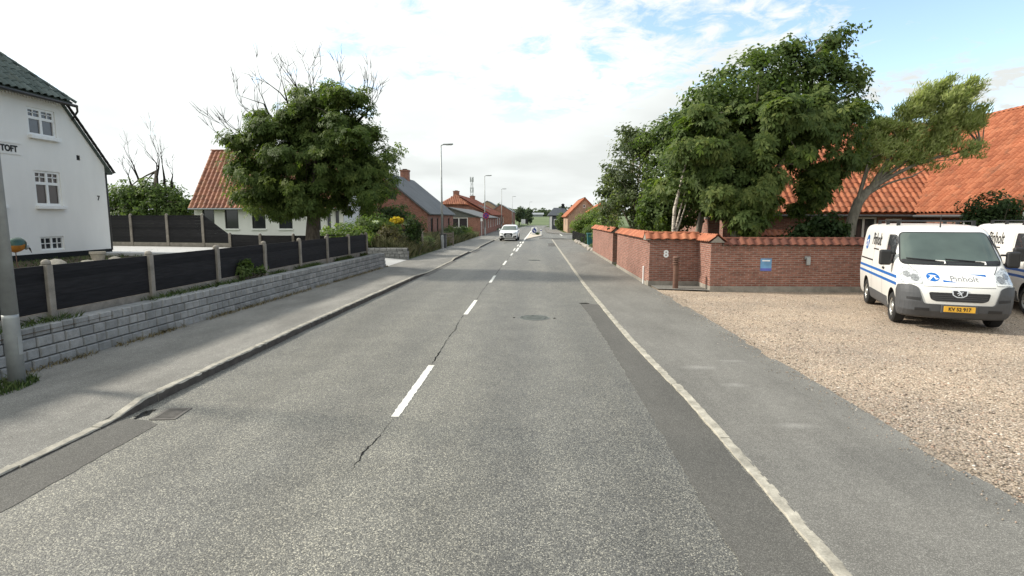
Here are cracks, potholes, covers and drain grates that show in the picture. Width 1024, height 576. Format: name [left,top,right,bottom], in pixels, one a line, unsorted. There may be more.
drain grate [149,408,192,420]
